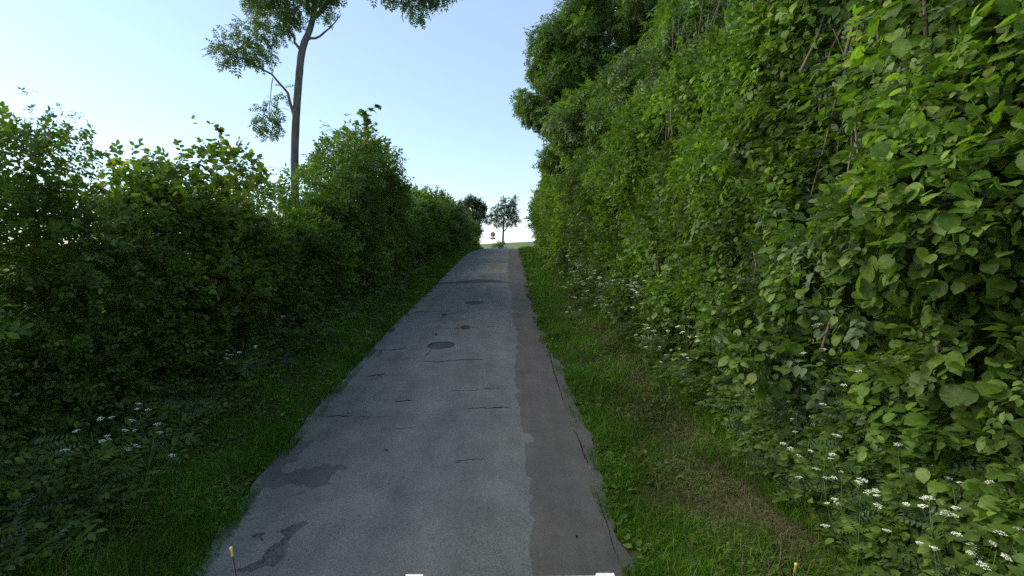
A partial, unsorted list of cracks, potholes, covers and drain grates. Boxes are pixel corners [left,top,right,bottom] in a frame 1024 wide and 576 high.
crack [547,347,625,576]
manhole cover [427,341,455,349]
crack [377,295,482,363]
